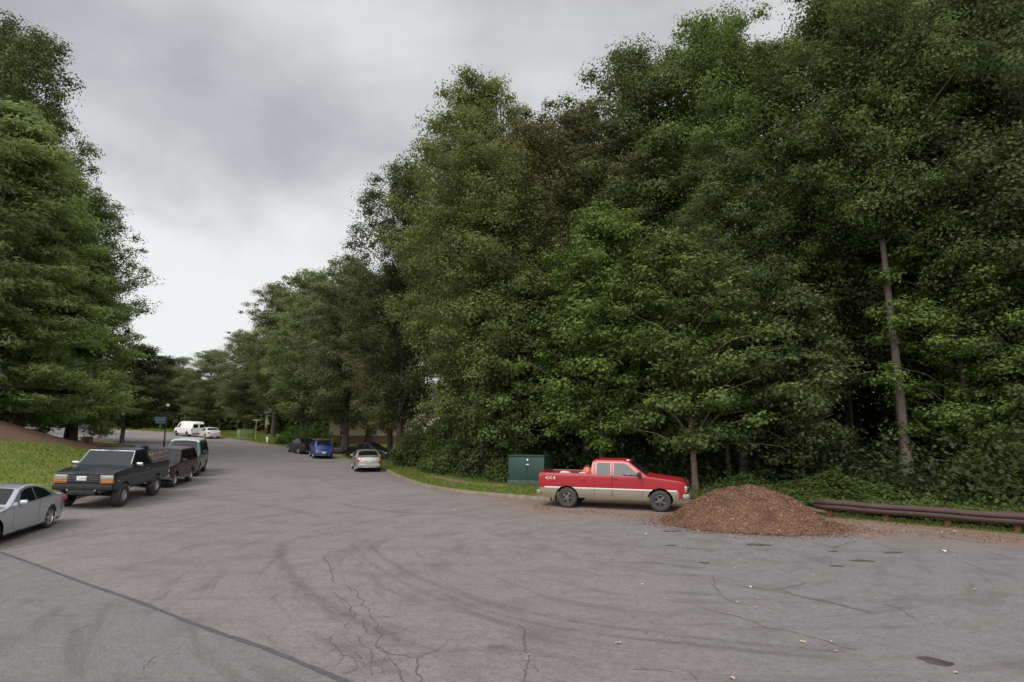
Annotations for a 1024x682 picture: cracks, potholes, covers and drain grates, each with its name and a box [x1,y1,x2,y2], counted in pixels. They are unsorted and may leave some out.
crack [518,624,539,682]
crack [759,582,869,612]
crack [322,554,450,682]
crack [701,578,851,649]
